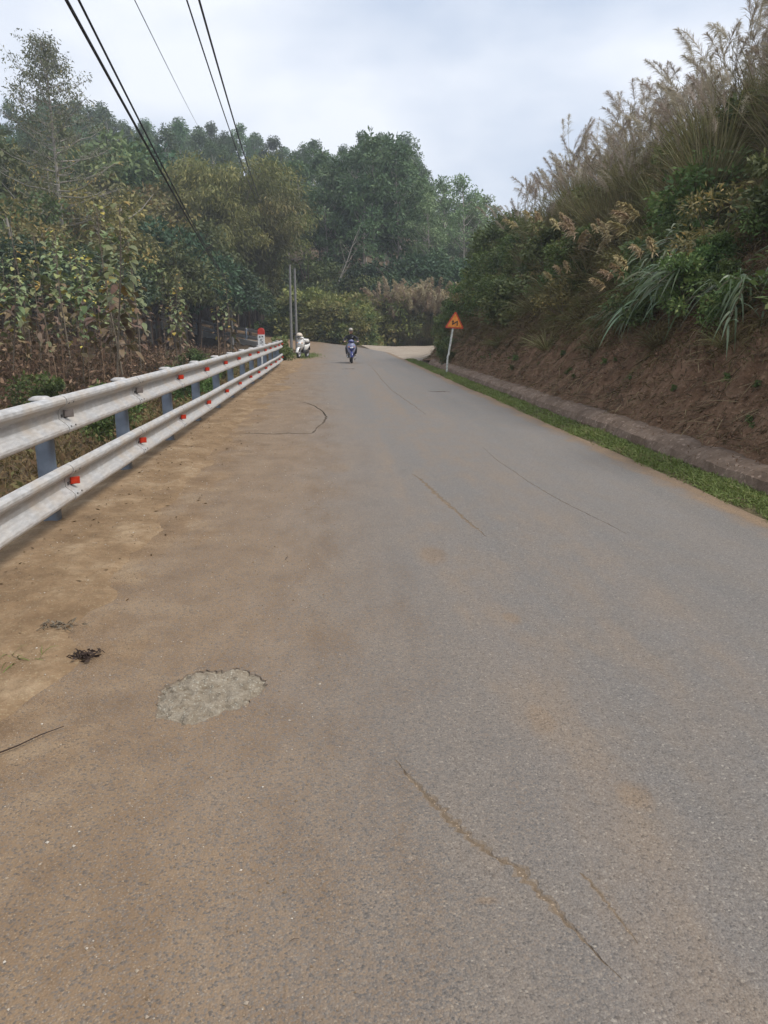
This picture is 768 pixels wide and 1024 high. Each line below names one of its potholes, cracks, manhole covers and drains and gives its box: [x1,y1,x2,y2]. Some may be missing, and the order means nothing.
crack [395,759,638,979]
crack [245,401,327,434]
crack [412,474,487,537]
